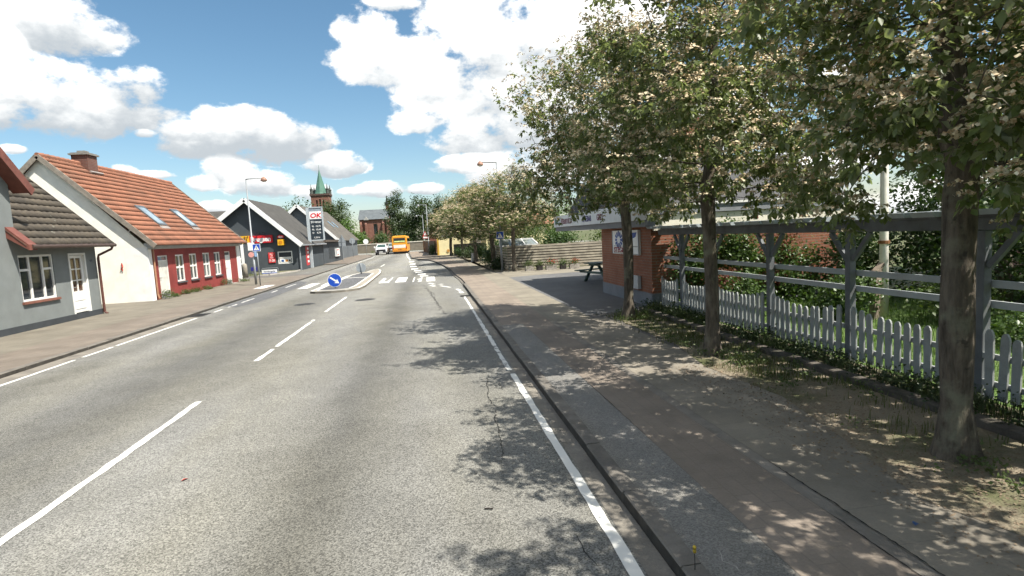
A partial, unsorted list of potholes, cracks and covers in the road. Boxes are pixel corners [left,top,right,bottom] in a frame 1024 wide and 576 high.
crack [486,378,504,464]
